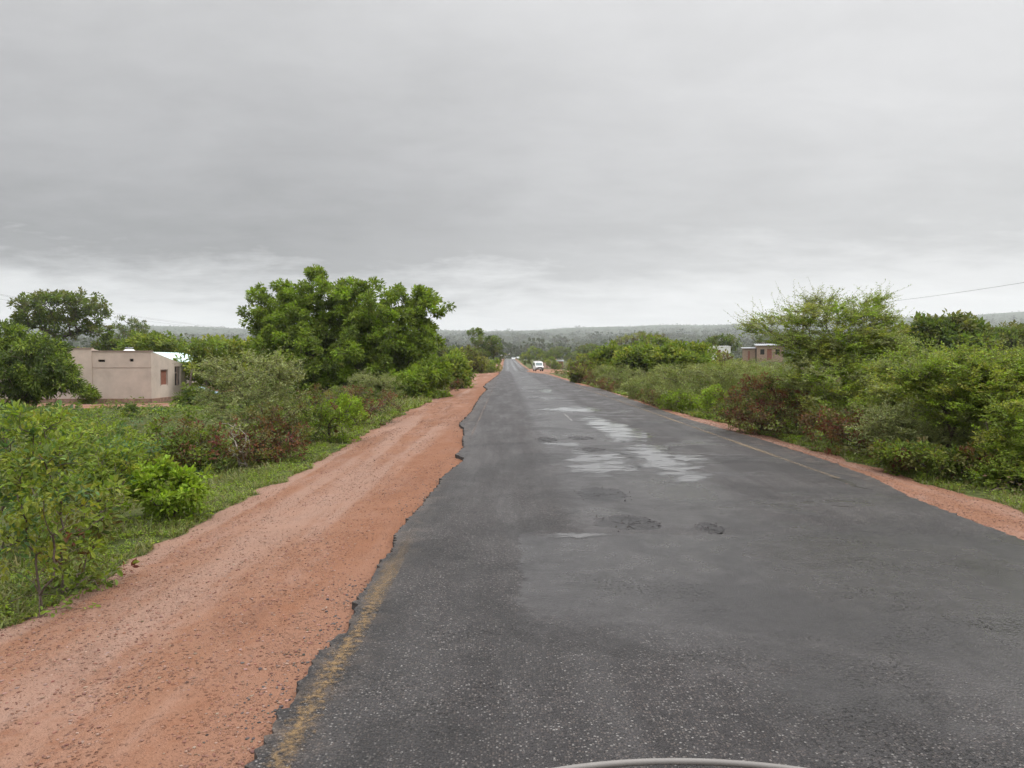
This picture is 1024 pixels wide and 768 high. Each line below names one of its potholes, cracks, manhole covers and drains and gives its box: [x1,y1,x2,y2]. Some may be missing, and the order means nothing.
pothole [693,522,727,534]
pothole [576,487,629,501]
pothole [593,514,662,531]
